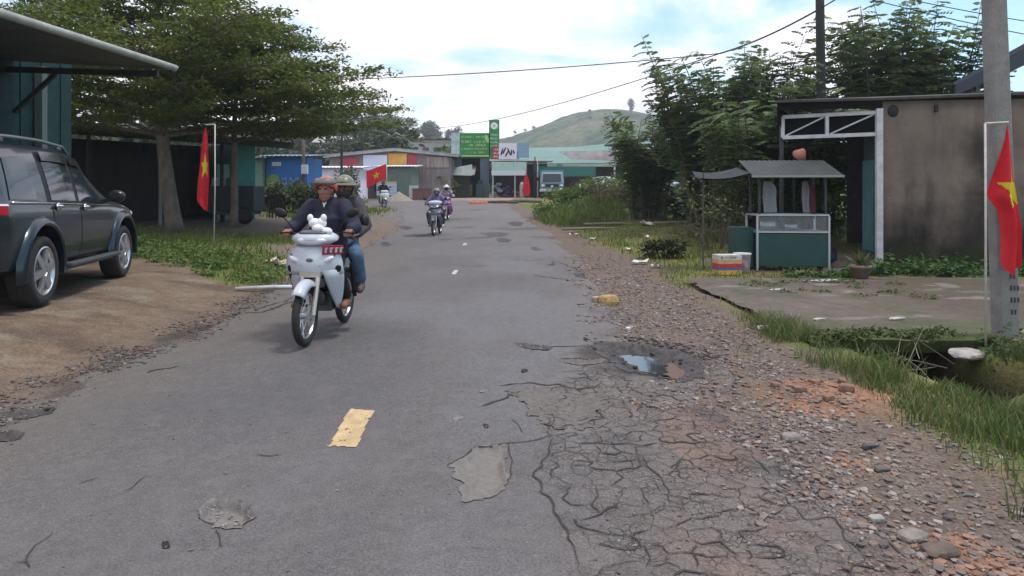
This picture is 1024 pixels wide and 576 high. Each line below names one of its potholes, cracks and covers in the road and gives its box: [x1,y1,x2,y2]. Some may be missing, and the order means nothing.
pothole [590,341,712,382]
pothole [0,406,56,420]
pothole [0,429,25,442]
crack [20,535,50,567]
crack [446,345,905,576]
